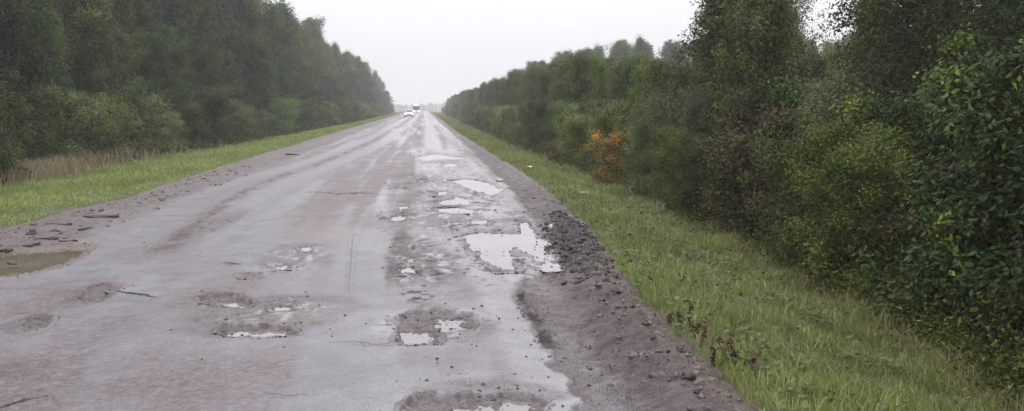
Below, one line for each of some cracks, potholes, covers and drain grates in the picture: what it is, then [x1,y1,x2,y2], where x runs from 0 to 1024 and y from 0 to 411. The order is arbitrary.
pothole [394,388,555,411]
pothole [405,152,478,163]
crack [344,233,358,294]
pothole [0,241,107,278]
pothole [292,244,319,253]
crack [102,288,161,299]
pothole [263,303,299,312]
pothole [192,291,256,309]
pothole [210,322,303,339]
pothole [440,177,515,197]
pothole [265,262,299,272]
pothole [382,308,481,346]
